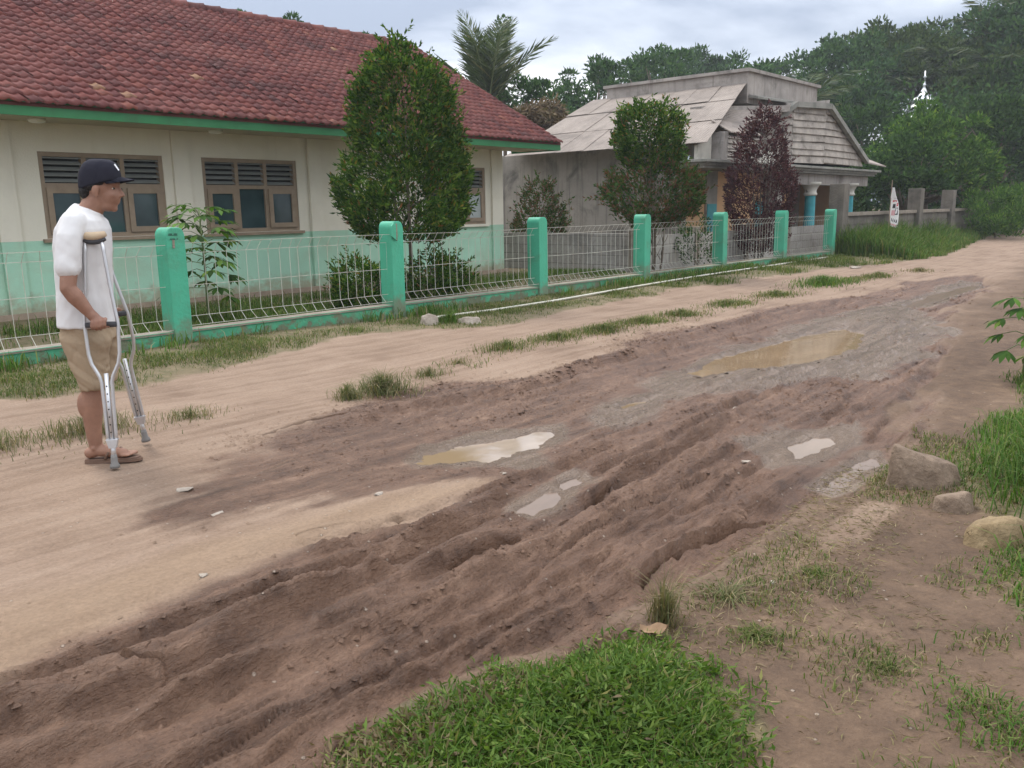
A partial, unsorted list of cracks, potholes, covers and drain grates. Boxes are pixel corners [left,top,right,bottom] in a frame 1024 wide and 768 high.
pothole [677,325,877,378]
pothole [499,465,599,527]
pothole [773,429,855,464]
pothole [399,420,574,469]
